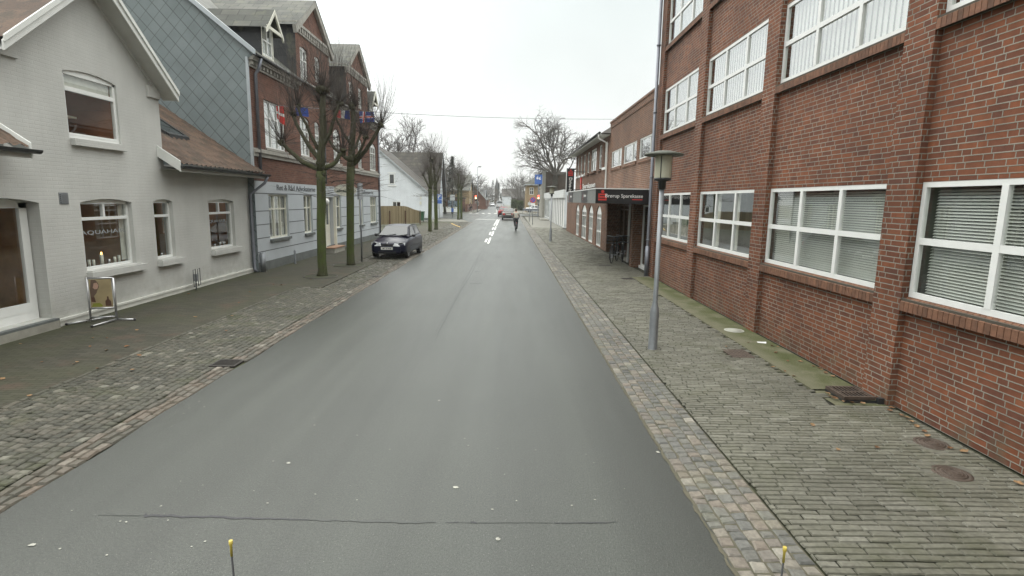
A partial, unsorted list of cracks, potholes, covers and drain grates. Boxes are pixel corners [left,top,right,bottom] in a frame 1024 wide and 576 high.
manhole cover [916,460,990,489]
manhole cover [900,434,962,455]
drain grate [825,386,884,404]
drain grate [209,359,245,368]
manhole cover [722,349,756,358]
